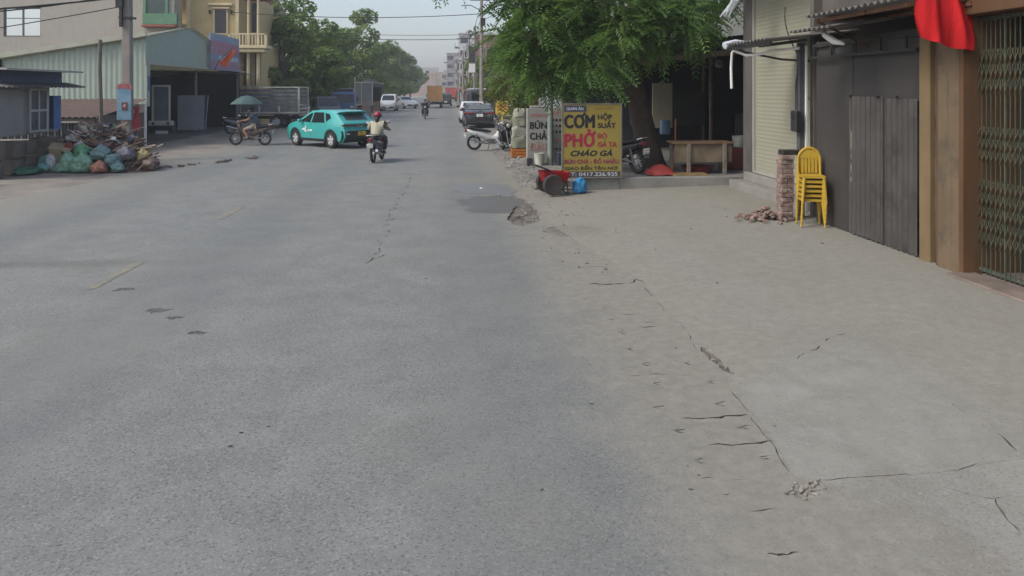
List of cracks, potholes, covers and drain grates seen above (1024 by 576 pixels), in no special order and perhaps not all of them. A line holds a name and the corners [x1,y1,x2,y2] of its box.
crack [942,486,1021,533]
crack [689,392,789,472]
pothole [784,478,826,501]
crack [832,465,973,480]
pothole [507,205,541,226]
